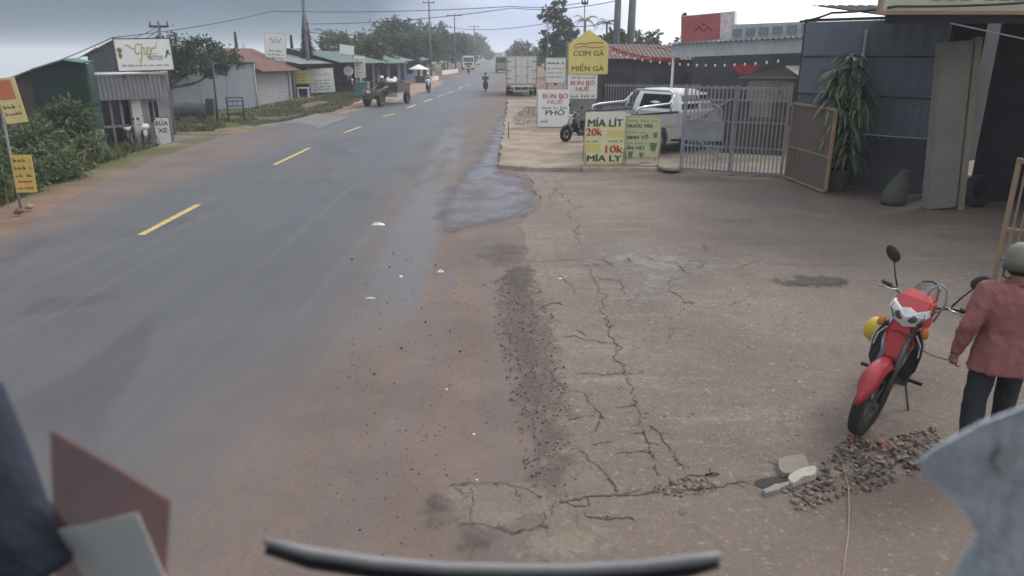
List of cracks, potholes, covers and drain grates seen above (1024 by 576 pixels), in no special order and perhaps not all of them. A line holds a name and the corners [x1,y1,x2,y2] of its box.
crack [526,257,684,493]
crack [649,243,712,304]
crack [584,510,636,521]
